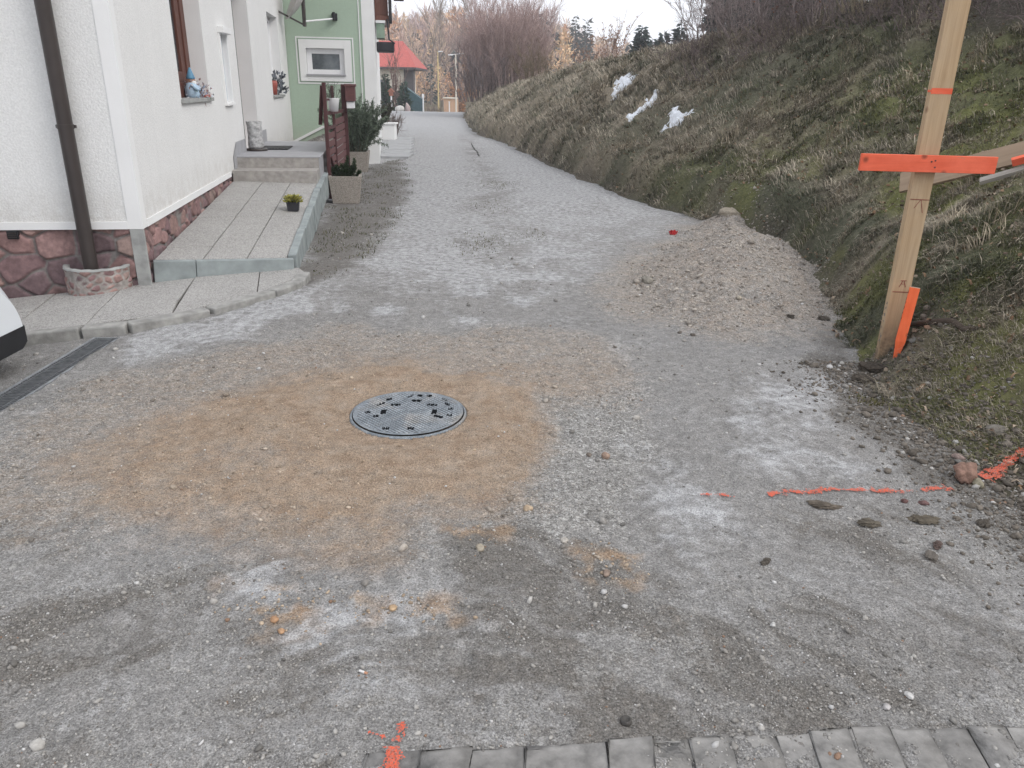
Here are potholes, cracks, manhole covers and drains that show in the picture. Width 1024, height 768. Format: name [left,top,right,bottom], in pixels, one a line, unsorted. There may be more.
drain grate [0,337,118,411]
manhole cover [349,391,467,439]
